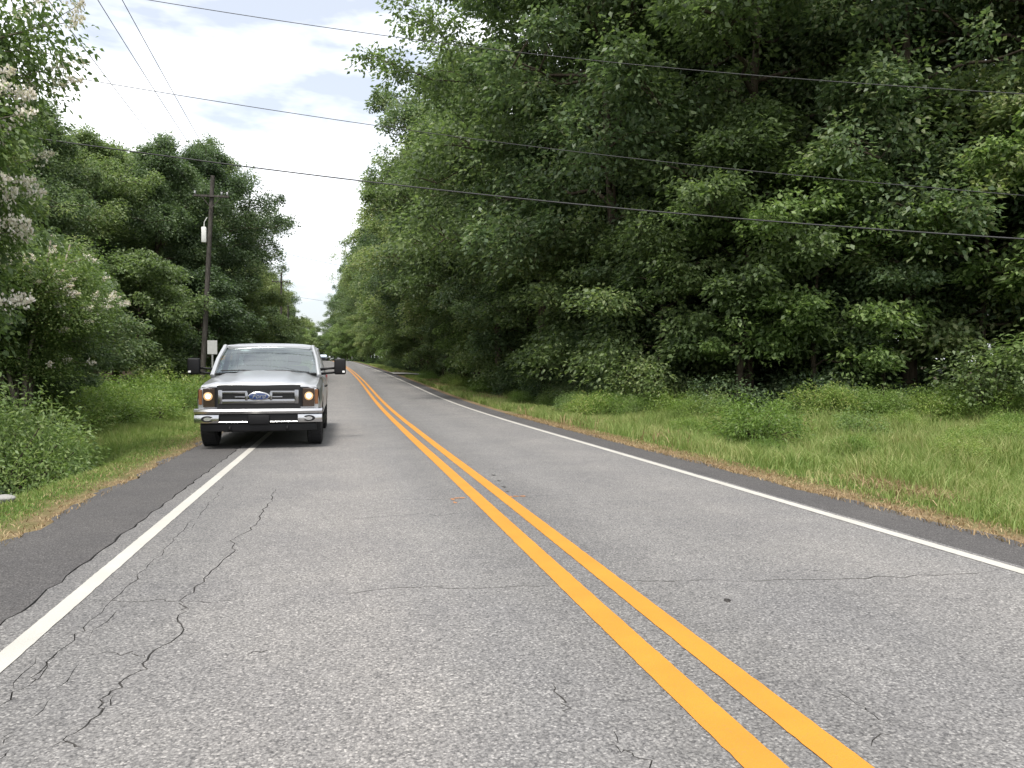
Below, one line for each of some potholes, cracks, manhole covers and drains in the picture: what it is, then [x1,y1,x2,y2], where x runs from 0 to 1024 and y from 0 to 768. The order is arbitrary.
crack [632,570,997,592]
crack [1,489,276,758]
crack [553,685,571,713]
crack [841,693,896,746]
crack [611,731,653,768]
